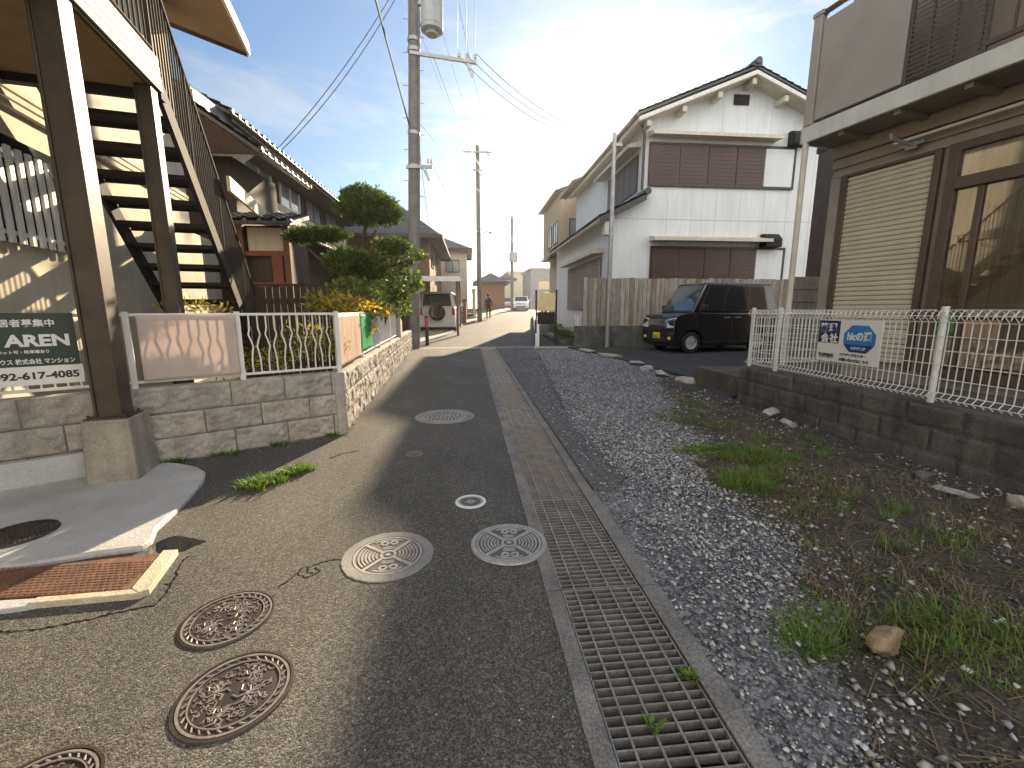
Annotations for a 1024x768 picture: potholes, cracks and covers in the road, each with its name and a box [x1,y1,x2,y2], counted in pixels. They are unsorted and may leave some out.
crack [0,556,189,633]
manhole cover [176,590,276,650]
manhole cover [168,650,295,746]
manhole cover [18,745,107,768]
manhole cover [0,519,61,549]
manhole cover [340,532,434,583]
drain grate [532,499,638,592]
manhole cover [455,495,486,509]
drain grate [562,586,750,768]
manhole cover [415,409,474,424]
crack [270,559,339,599]
manhole cover [471,524,547,566]
